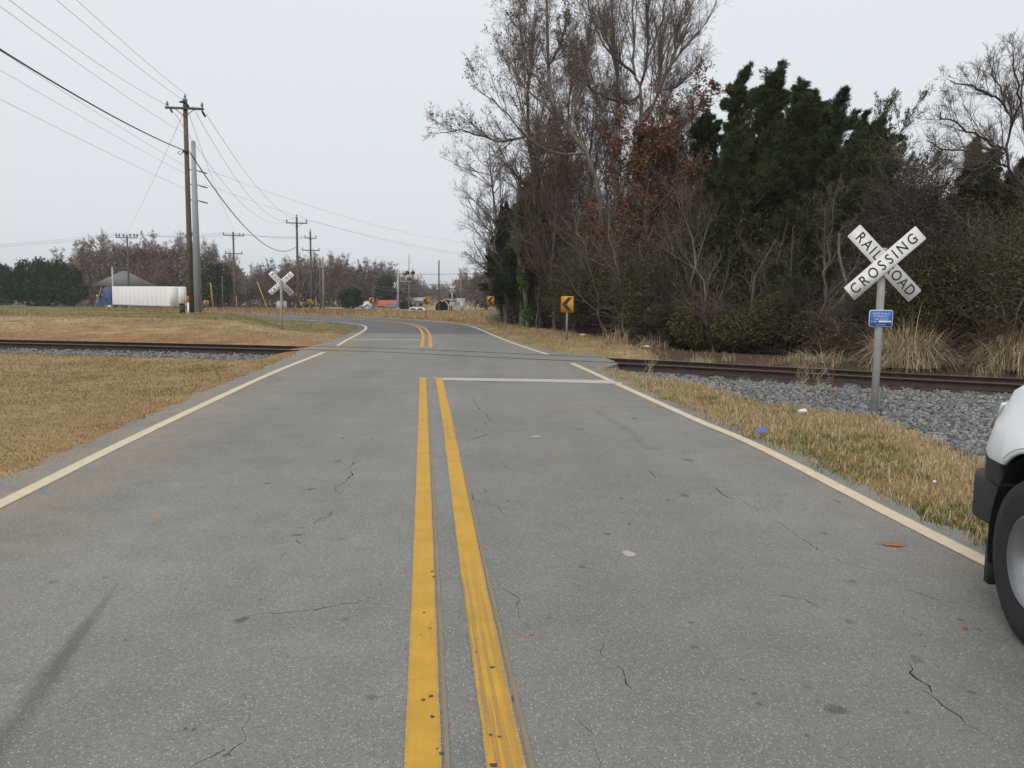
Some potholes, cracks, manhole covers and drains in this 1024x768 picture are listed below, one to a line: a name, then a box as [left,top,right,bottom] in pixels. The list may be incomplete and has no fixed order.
crack [190,713,250,768]
crack [238,597,372,616]
crack [890,611,1023,753]
